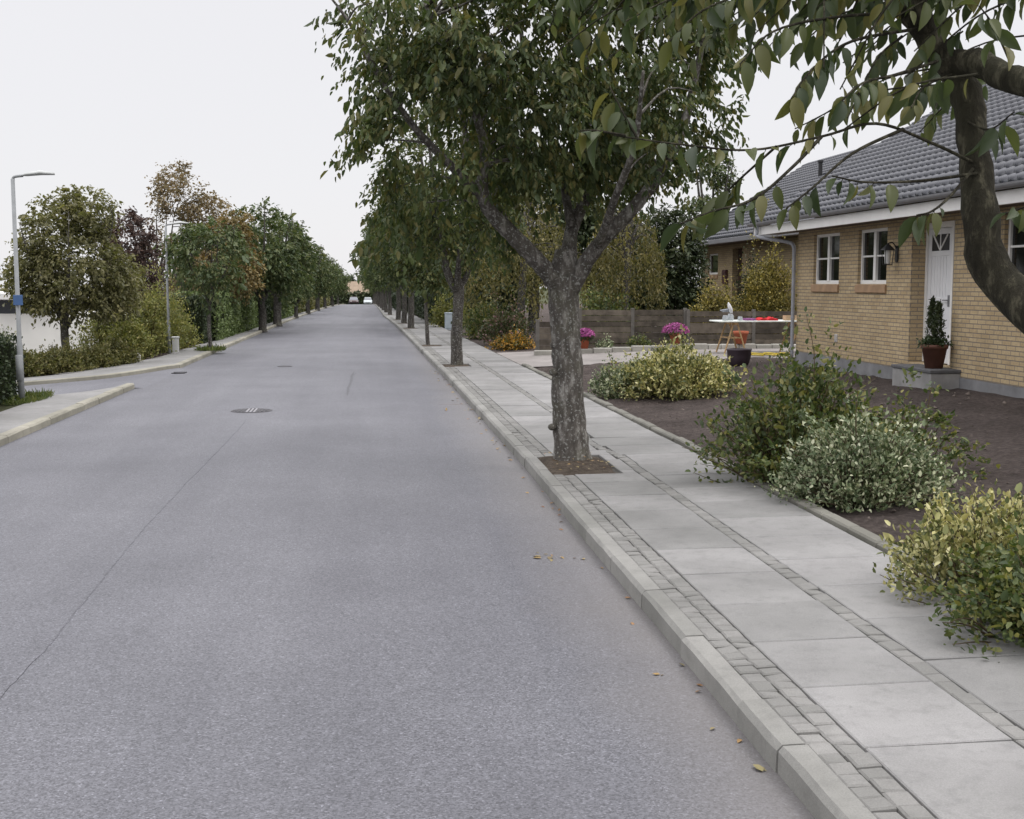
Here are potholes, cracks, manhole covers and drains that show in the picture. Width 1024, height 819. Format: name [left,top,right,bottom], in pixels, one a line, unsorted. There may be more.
crack [0,423,244,699]
crack [346,371,356,396]
